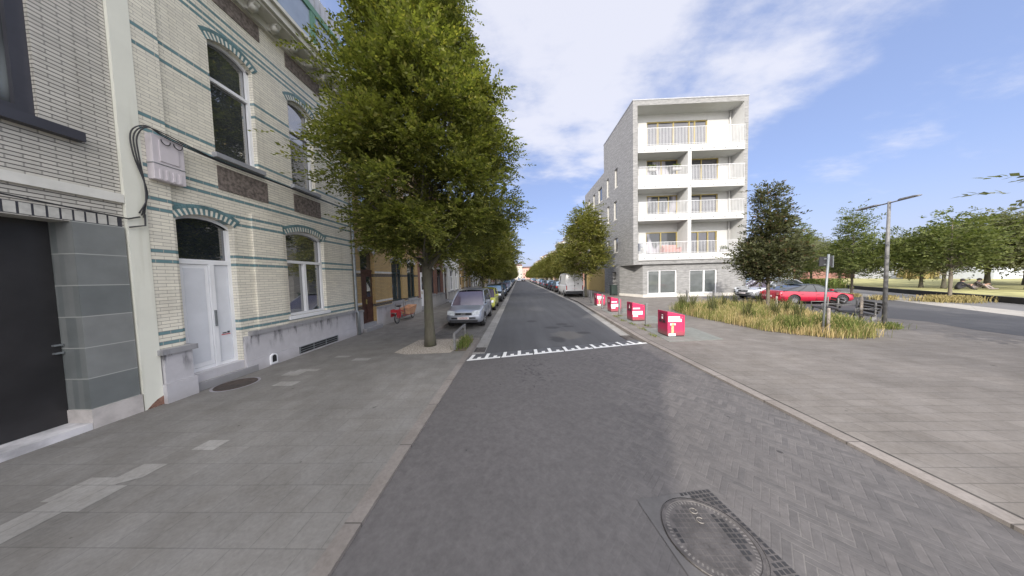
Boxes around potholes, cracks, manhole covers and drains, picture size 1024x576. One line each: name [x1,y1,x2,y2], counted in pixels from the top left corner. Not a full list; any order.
manhole cover [637,490,799,576]
